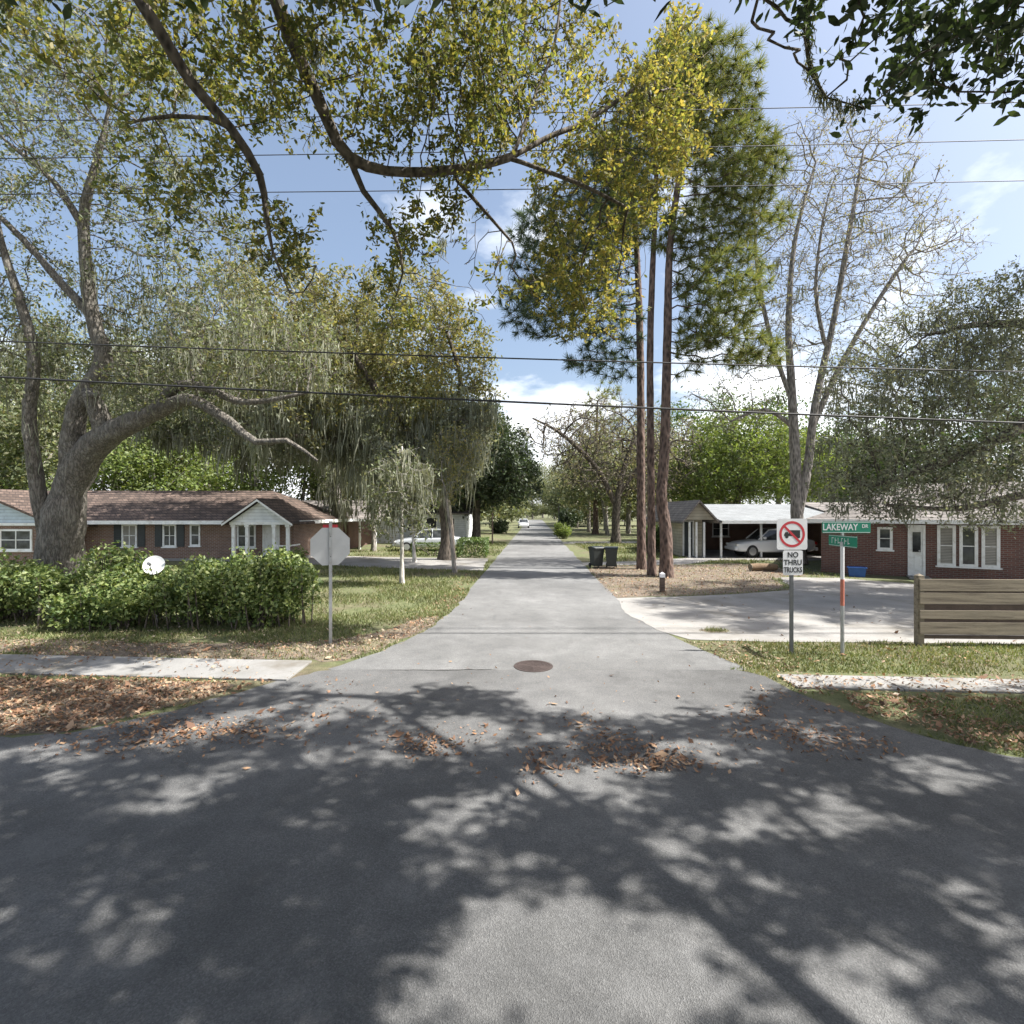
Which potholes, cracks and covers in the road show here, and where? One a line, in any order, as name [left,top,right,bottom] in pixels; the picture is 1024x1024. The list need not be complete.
manhole cover [514,660,553,672]
